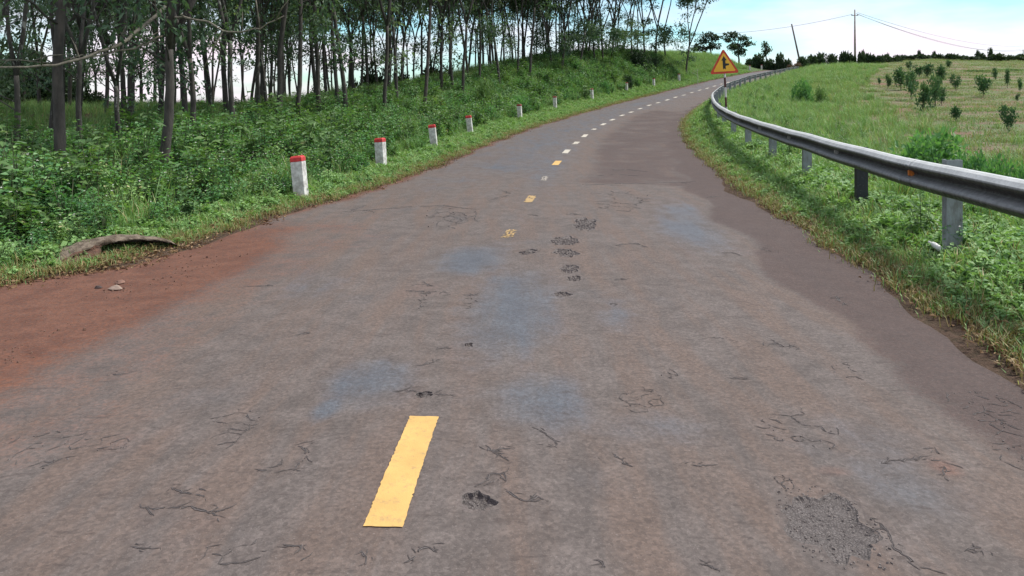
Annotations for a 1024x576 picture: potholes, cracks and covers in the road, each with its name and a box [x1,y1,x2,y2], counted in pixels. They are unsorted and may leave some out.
pothole [774,486,894,571]
pothole [550,248,583,258]
pothole [546,235,581,246]
crack [139,483,235,521]
pothole [569,217,600,232]
crack [946,392,1024,470]
crack [881,448,963,481]
pothole [454,488,506,515]
crack [257,440,315,473]
crack [211,409,260,448]
crack [8,431,129,469]
crack [620,369,678,413]
